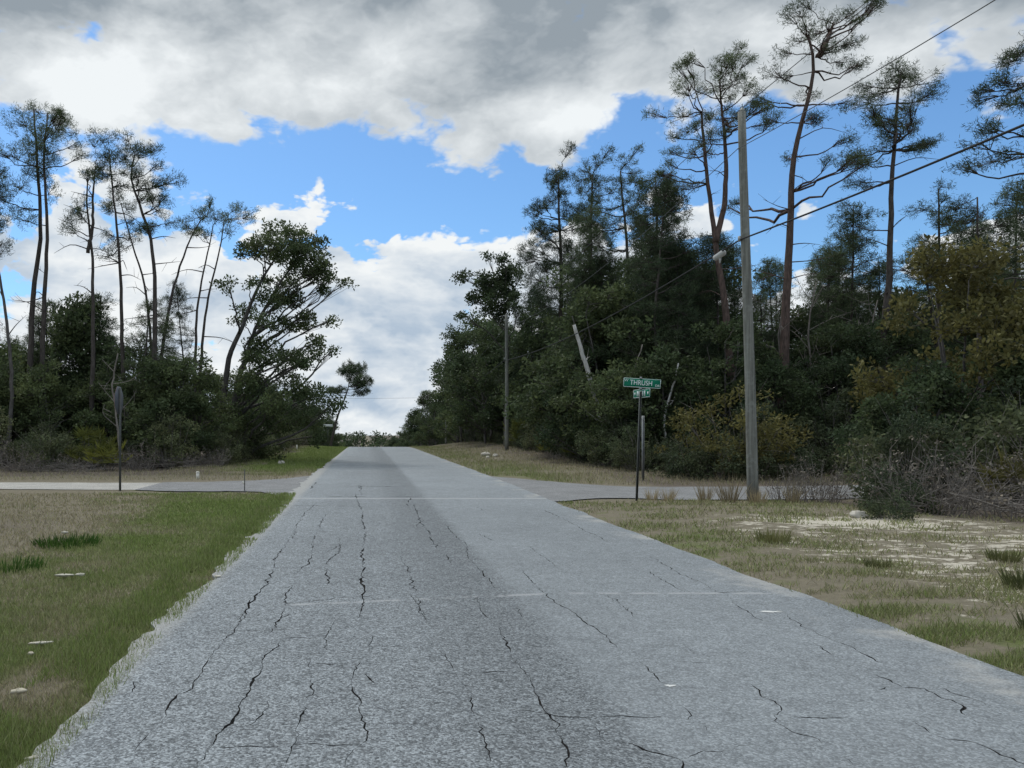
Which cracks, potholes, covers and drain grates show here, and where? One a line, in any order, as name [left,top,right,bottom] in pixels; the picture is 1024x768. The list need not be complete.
crack [135,482,754,768]
crack [916,723,1023,764]
crack [787,615,986,718]
crack [752,685,852,763]
